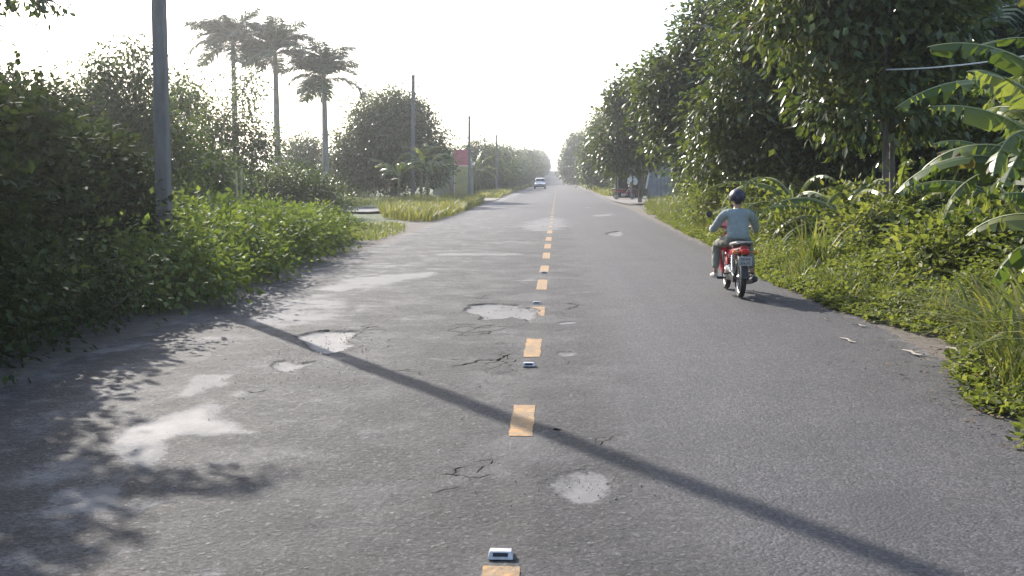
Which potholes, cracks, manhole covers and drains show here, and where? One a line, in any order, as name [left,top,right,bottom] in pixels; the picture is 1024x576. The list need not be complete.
pothole [462,303,540,322]
pothole [293,329,359,354]
pothole [269,359,318,372]
pothole [538,468,619,505]
crack [432,460,493,493]
crack [448,324,516,375]
